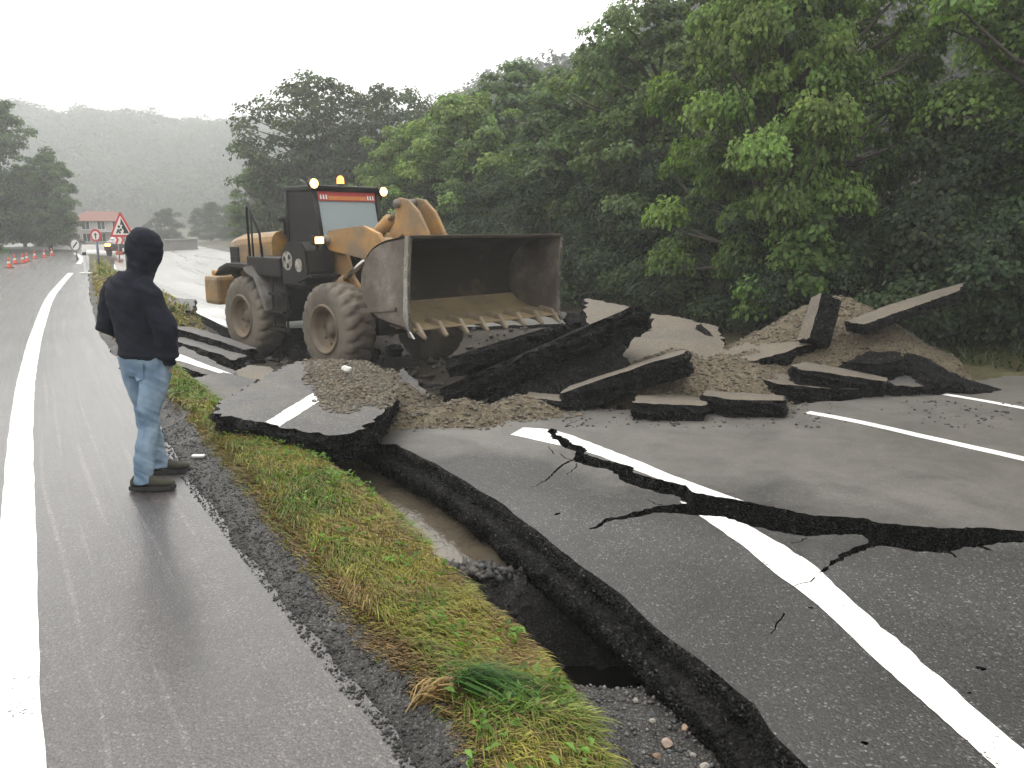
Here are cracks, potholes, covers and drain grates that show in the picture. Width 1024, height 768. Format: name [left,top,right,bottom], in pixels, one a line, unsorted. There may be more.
crack [533,420,1024,625]
